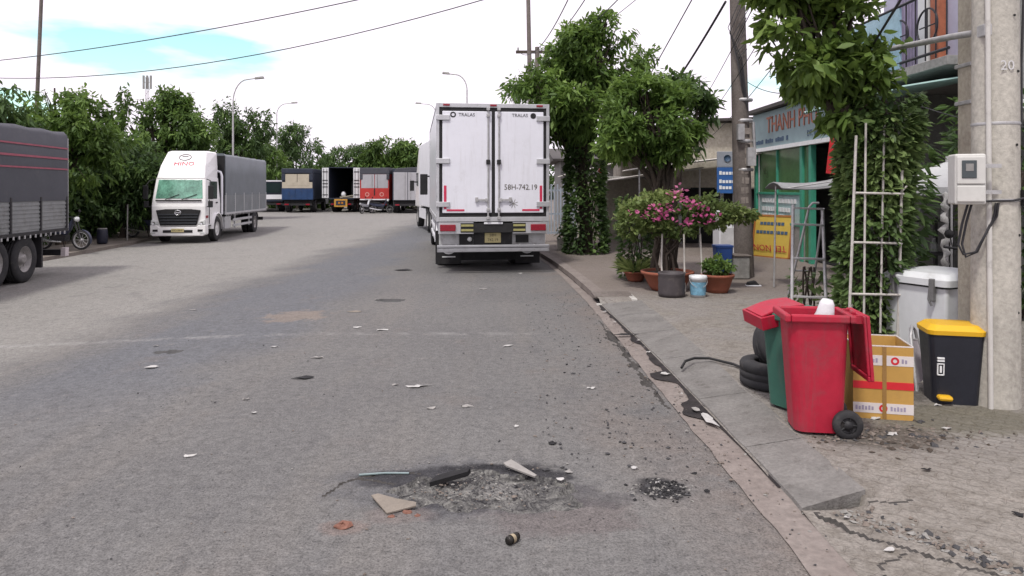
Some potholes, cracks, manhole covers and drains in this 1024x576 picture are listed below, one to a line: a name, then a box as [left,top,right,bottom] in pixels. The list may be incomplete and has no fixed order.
crack [321,471,421,497]
pothole [384,469,584,514]
